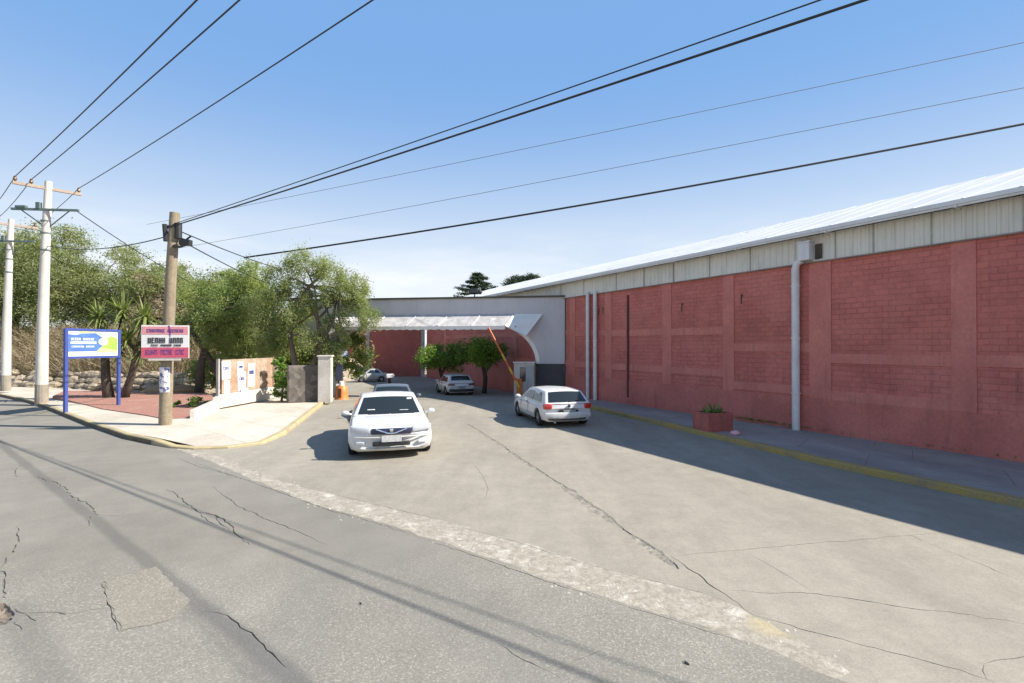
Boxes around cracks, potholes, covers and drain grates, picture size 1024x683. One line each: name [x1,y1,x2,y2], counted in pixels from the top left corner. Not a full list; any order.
crack [0,478,144,632]
pothole [0,603,15,625]
crack [670,533,1024,683]
crack [204,611,287,668]
crack [166,462,321,544]
crack [338,495,727,602]
